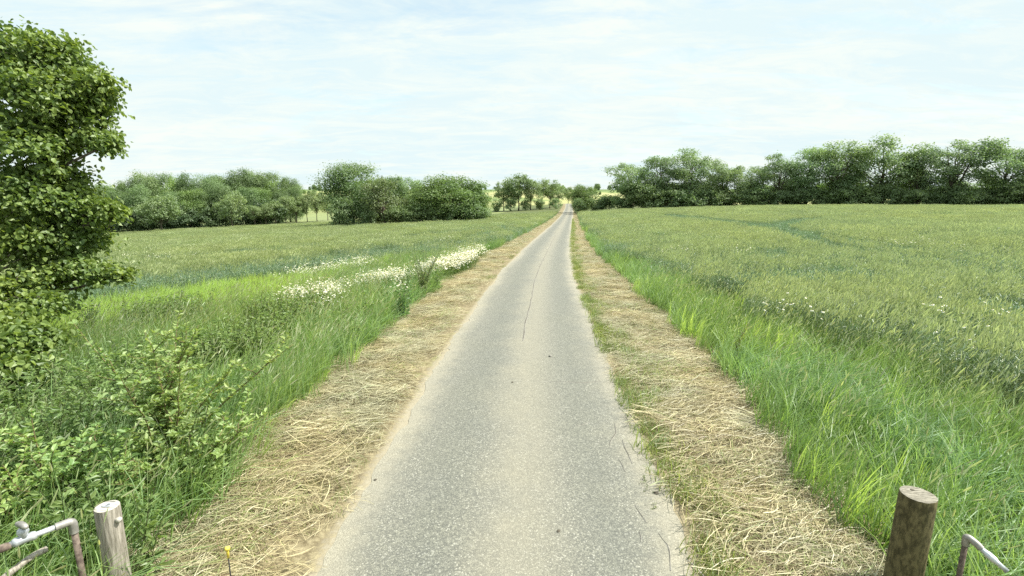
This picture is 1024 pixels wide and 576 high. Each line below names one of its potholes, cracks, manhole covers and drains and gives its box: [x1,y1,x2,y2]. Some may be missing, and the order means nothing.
crack [522,237,555,341]
